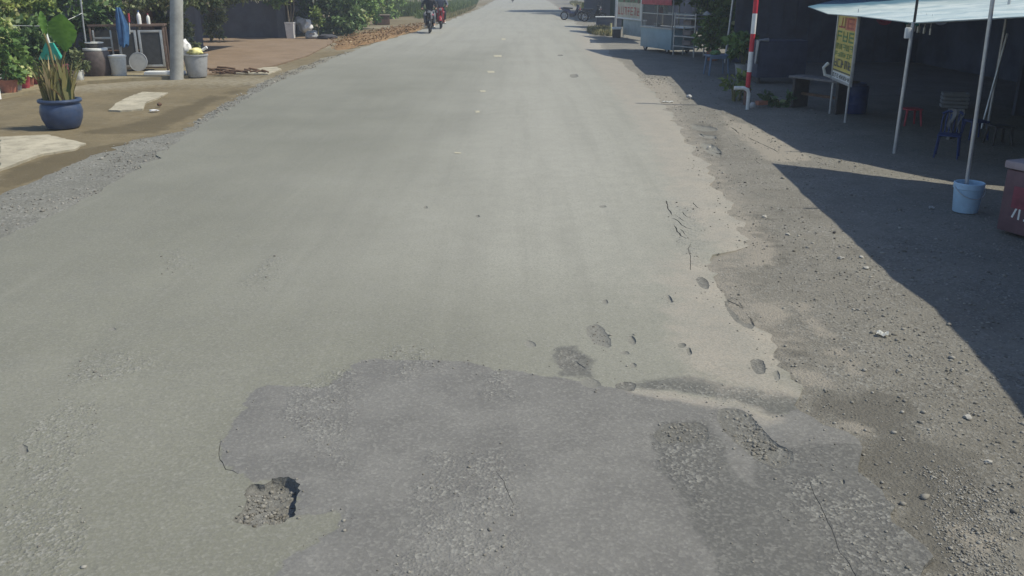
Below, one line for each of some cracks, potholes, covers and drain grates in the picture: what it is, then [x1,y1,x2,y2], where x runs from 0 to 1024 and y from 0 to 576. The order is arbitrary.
crack [809,480,856,576]
pothole [724,298,755,329]
pothole [717,408,794,468]
pothole [750,359,766,374]
pothole [233,477,301,528]
pothole [586,324,611,348]
crack [666,201,698,270]
